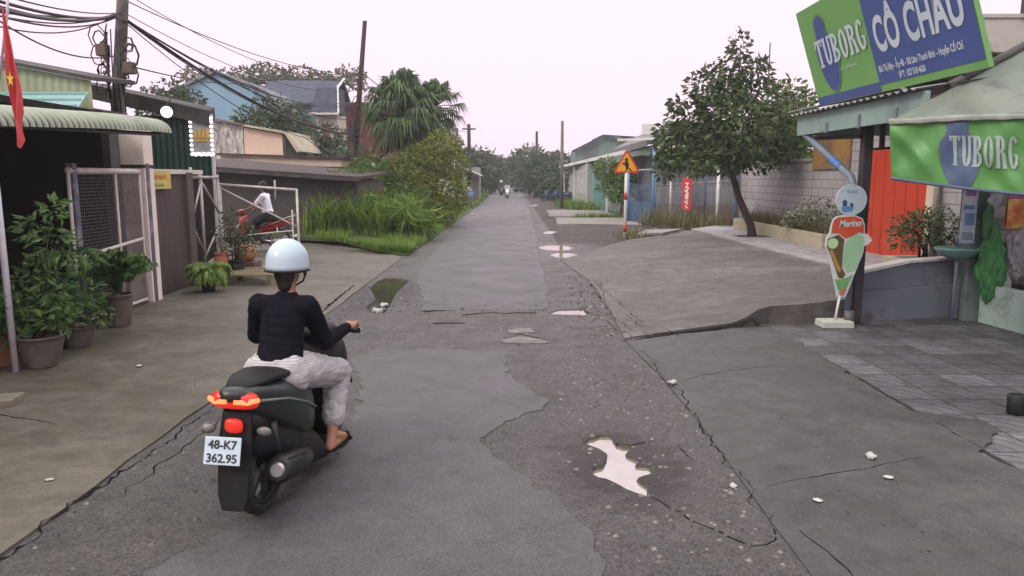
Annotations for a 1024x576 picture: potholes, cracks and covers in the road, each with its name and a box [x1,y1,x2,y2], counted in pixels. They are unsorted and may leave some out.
crack [769,457,921,486]
crack [580,280,760,342]
pothole [366,278,409,313]
crack [651,496,777,546]
crack [799,530,853,576]
pothole [582,434,655,496]
crack [424,310,536,324]
crack [125,417,221,494]
